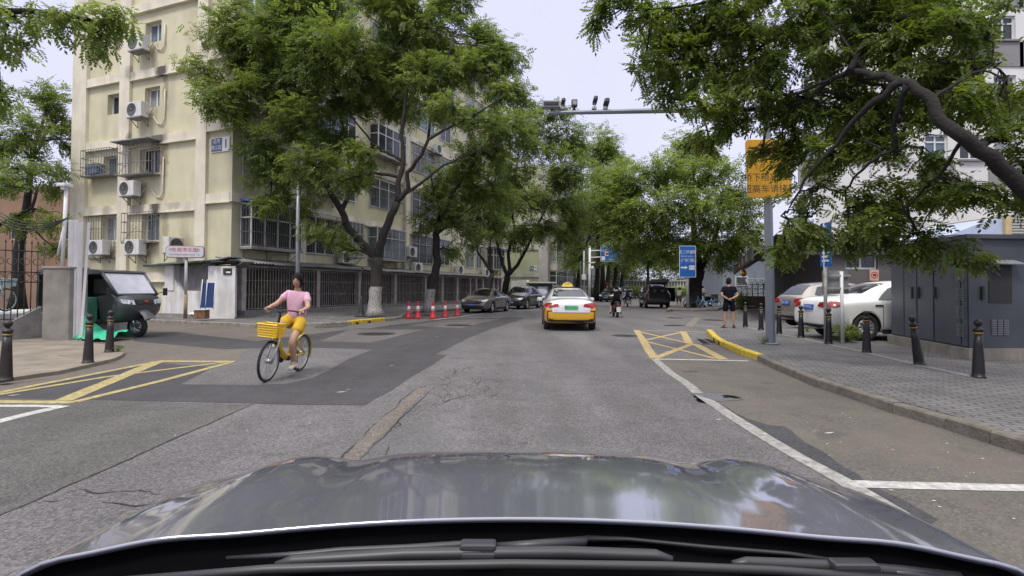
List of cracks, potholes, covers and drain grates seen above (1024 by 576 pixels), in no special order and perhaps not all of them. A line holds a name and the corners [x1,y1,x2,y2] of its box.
crack [341,368,501,458]
crack [49,489,154,506]
